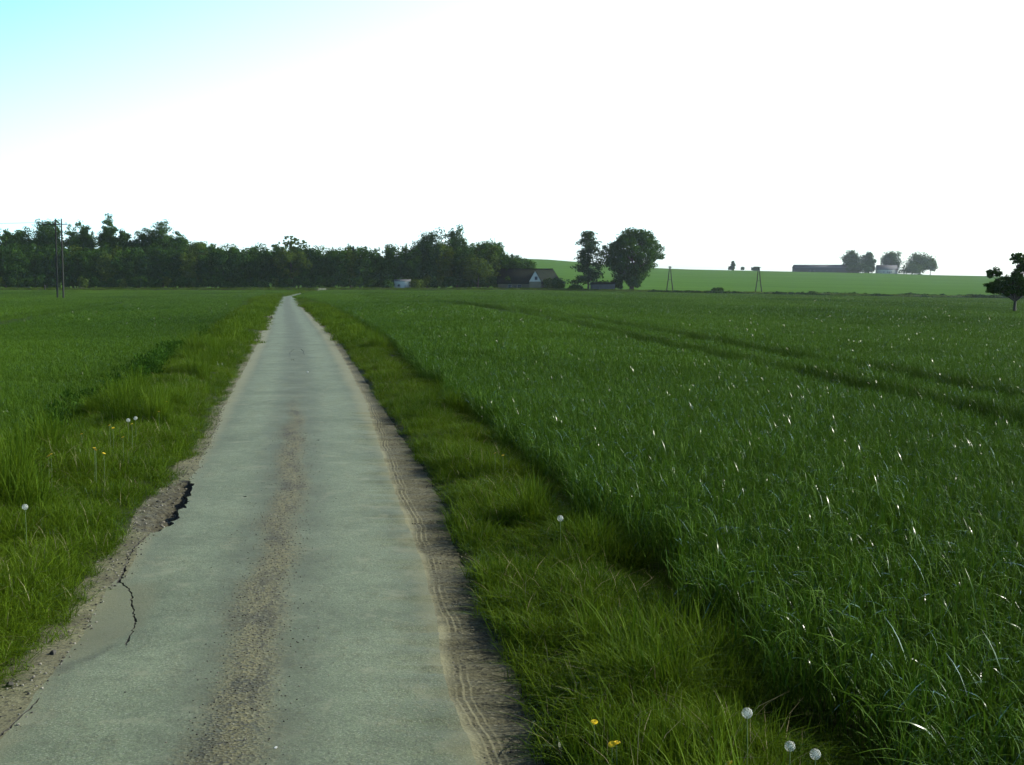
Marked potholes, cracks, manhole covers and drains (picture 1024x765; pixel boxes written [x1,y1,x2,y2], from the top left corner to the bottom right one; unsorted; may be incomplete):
crack [117,534,149,647]
